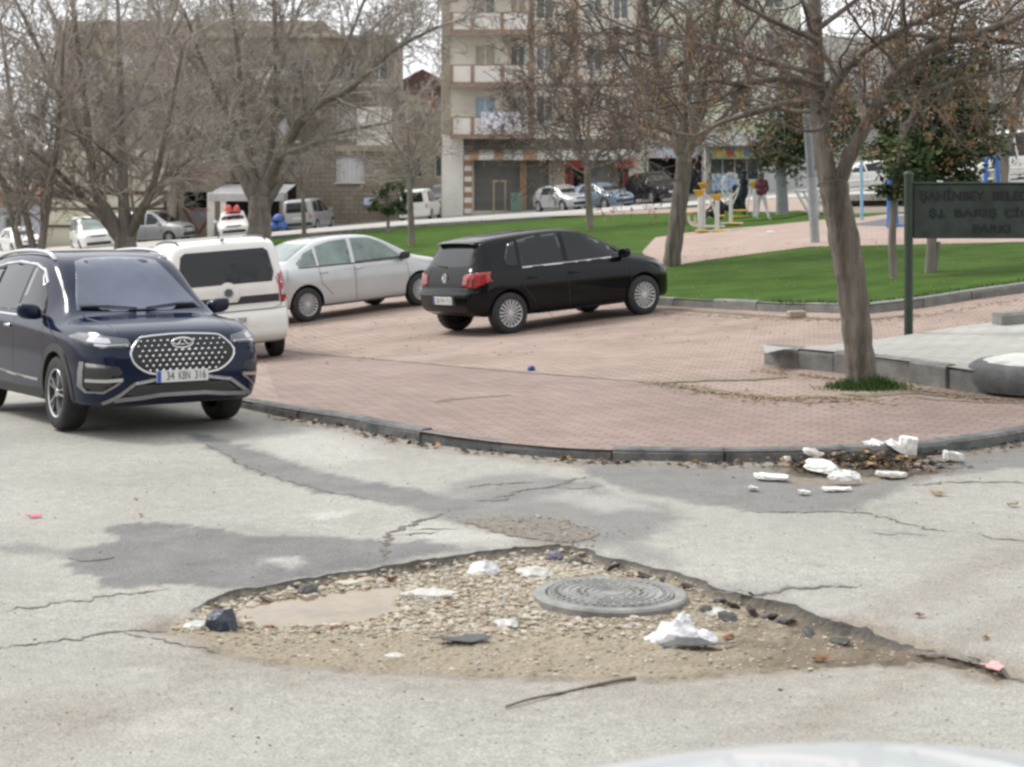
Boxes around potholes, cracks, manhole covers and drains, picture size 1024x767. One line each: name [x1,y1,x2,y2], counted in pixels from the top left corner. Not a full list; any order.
crack [378,512,449,561]
pothole [168,544,1007,681]
manhole cover [533,576,688,618]
crack [464,476,593,543]
crack [5,588,168,612]
crack [0,625,219,654]
crack [710,585,858,596]
